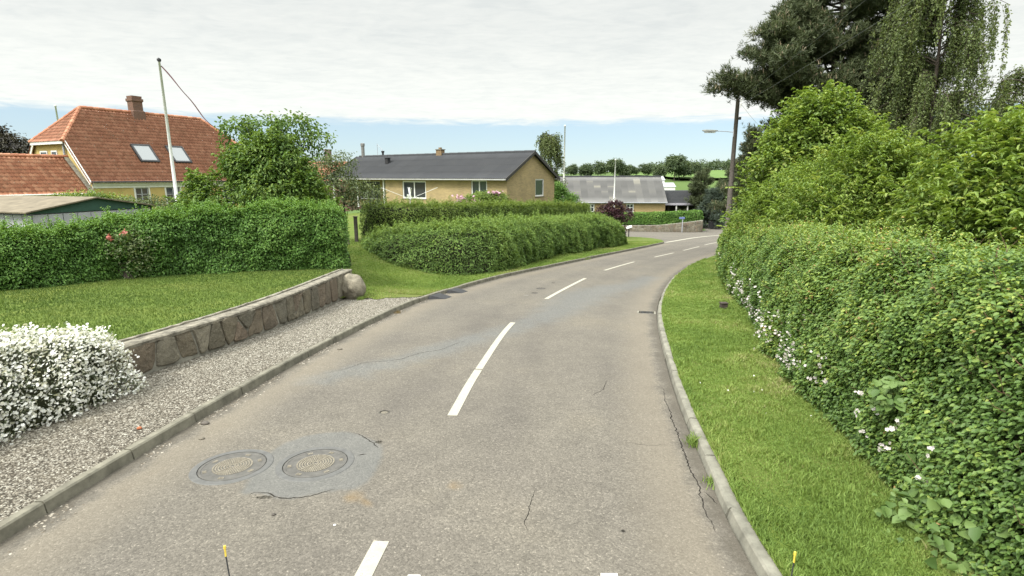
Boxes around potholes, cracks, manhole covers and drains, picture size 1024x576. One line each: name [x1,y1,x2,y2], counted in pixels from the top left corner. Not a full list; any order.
crack [625,389,717,530]
manhole cover [275,447,355,482]
manhole cover [188,449,274,485]
